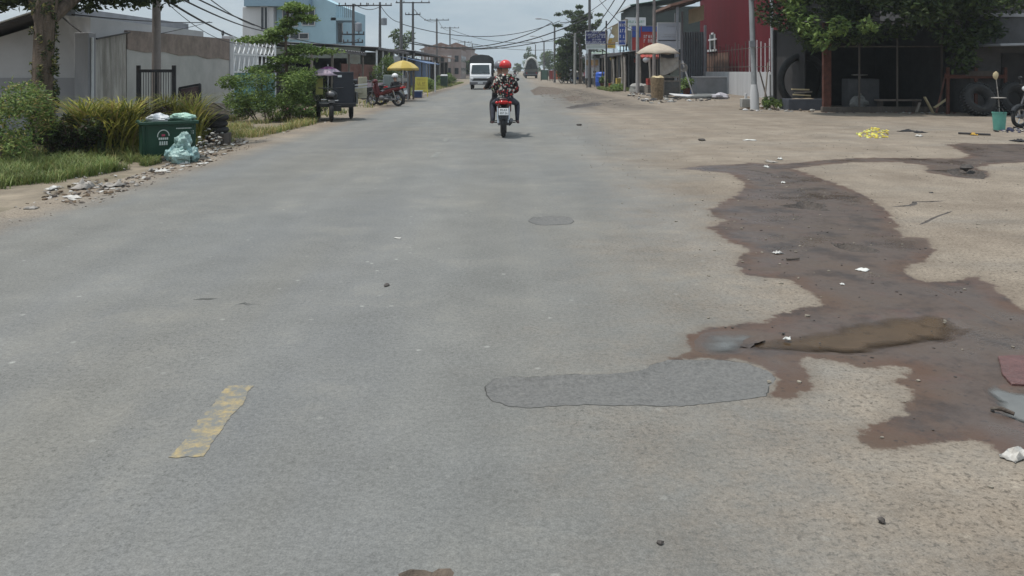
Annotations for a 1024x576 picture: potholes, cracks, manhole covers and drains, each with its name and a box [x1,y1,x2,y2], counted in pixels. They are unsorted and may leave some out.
crack [893,201,952,225]
pothole [694,331,765,355]
crack [193,298,255,306]
pothole [739,310,973,356]
